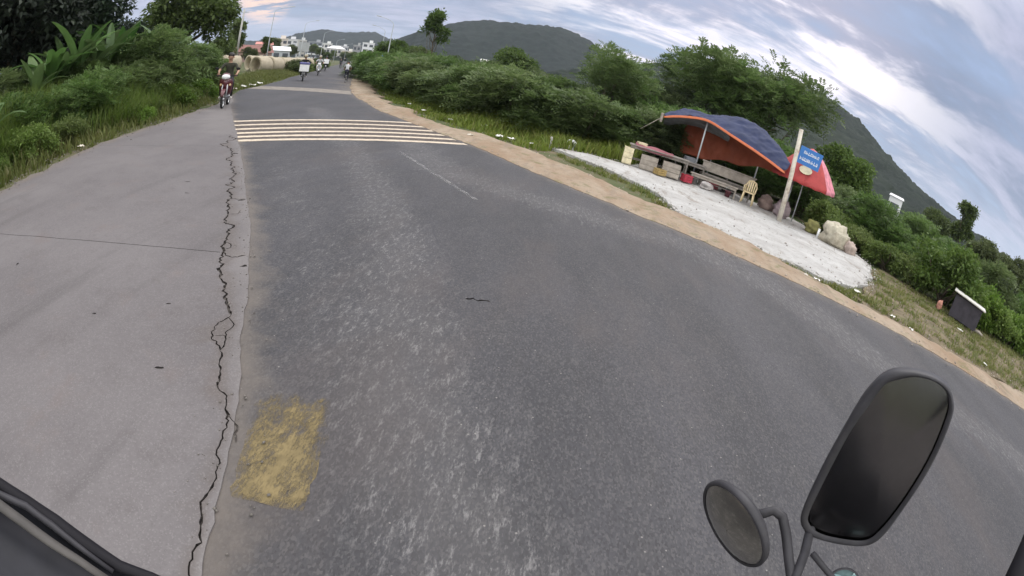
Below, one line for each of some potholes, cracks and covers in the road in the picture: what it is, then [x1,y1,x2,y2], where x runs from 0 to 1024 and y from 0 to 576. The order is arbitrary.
crack [188,136,241,576]
